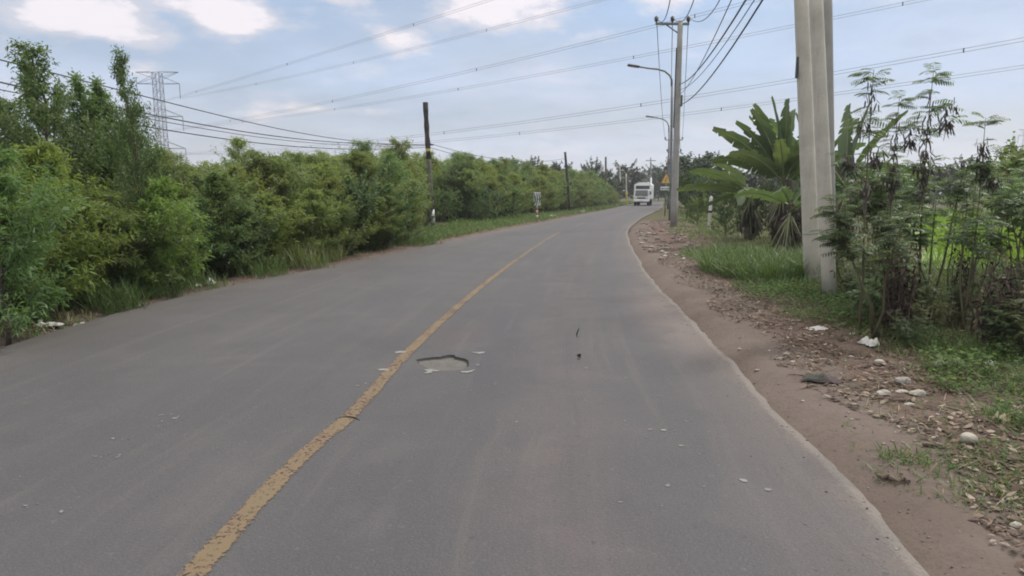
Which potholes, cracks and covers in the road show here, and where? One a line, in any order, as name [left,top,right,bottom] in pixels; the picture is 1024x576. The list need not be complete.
pothole [416,355,469,371]
